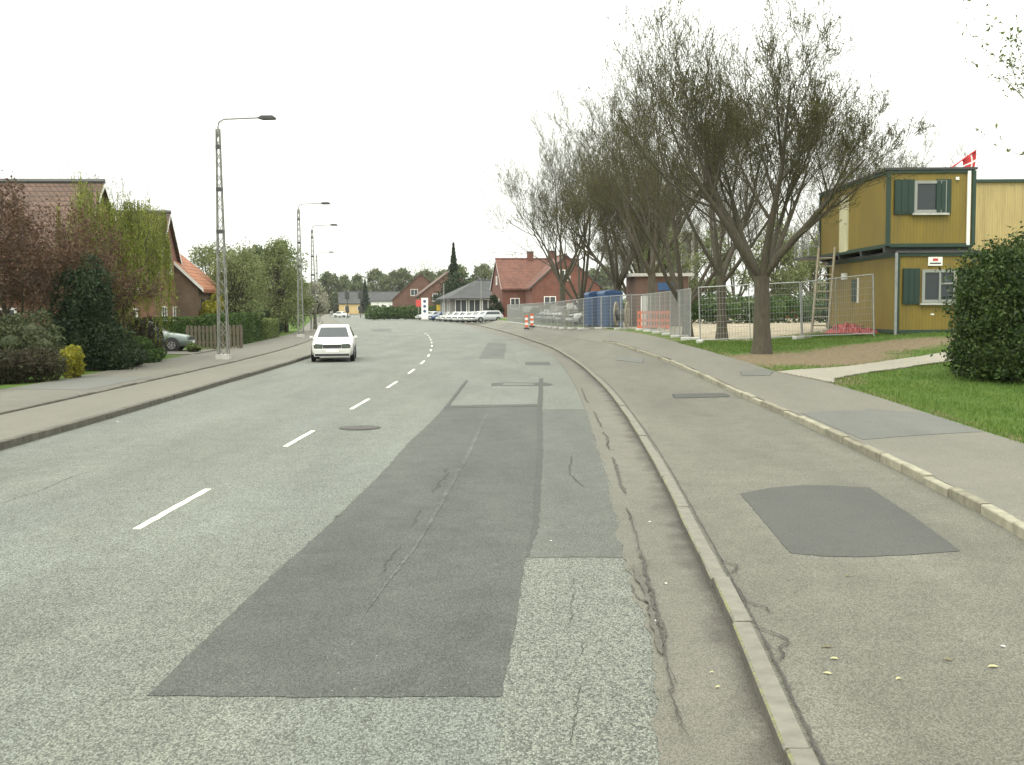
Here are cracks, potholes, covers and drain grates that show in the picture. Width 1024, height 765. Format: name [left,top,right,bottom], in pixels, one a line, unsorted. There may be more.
crack [569,364,828,765]
